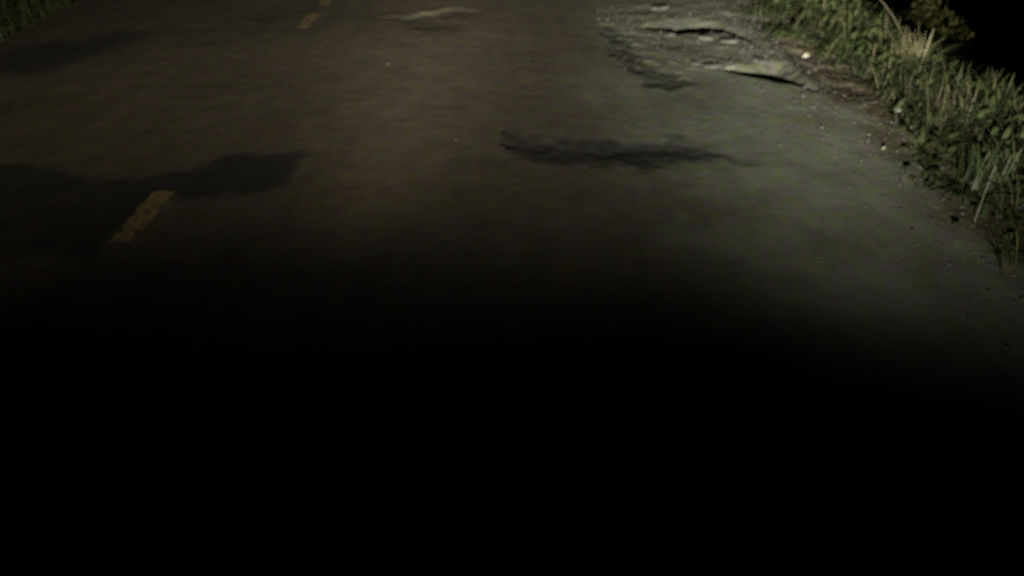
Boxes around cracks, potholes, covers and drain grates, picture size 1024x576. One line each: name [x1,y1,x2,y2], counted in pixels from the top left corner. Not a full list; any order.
pothole [377,6,492,38]
pothole [502,122,782,175]
